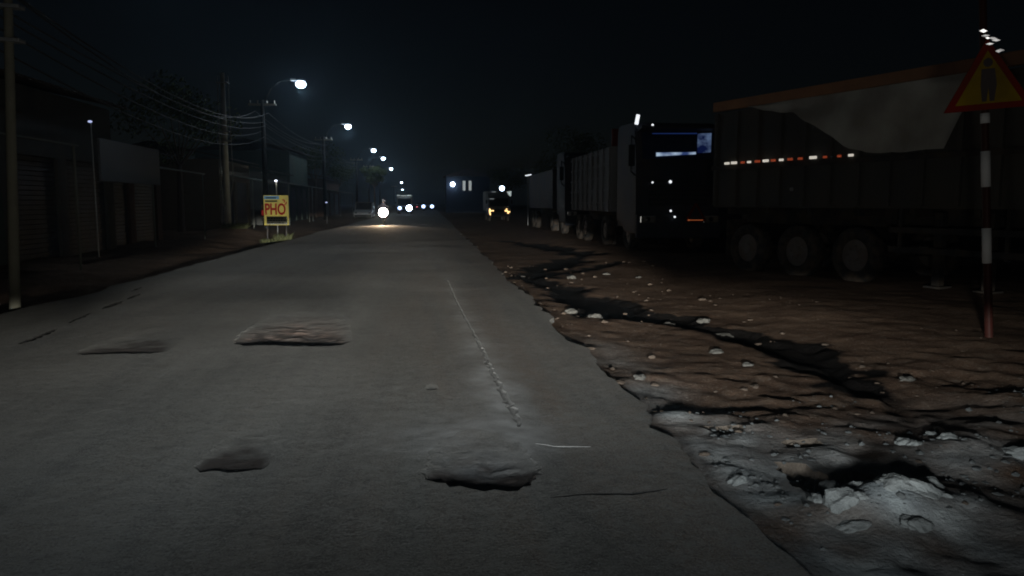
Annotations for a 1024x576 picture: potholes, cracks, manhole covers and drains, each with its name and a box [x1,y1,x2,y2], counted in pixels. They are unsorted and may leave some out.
crack [19,287,142,344]
pothole [698,425,744,435]
crack [550,489,666,498]
crack [448,281,582,448]
pothole [781,438,823,448]
pothole [774,462,868,495]
